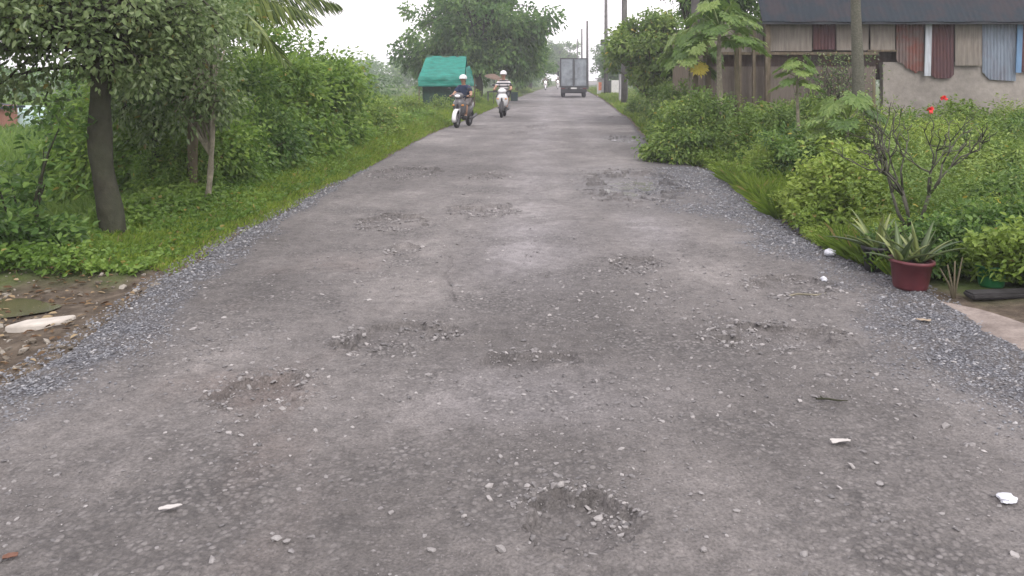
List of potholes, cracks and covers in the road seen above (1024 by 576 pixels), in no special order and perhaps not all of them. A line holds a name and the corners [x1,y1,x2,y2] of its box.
pothole [356,165,447,181]
pothole [568,166,707,209]
pothole [325,318,471,356]
pothole [350,211,432,233]
pothole [445,202,523,218]
pothole [465,170,512,181]
crack [441,256,458,303]
pothole [194,364,331,424]
pothole [506,479,654,555]
pothole [474,349,584,371]
pothole [692,318,860,355]
pothole [606,254,665,277]
